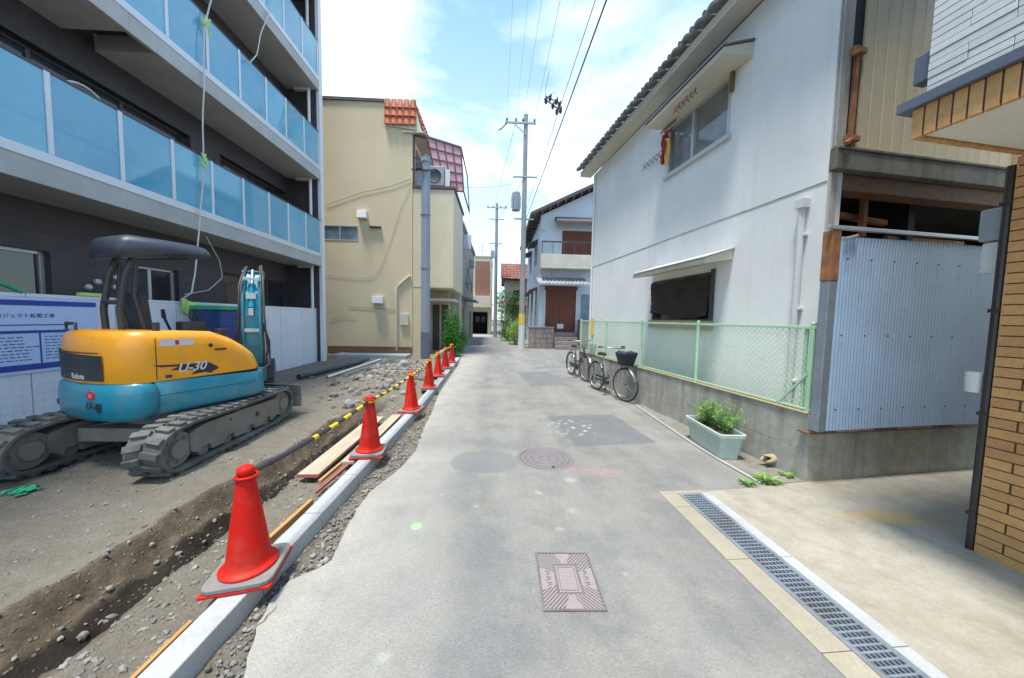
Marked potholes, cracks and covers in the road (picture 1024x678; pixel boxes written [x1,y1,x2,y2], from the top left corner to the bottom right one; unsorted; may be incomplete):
manhole cover [516,447,574,472]
manhole cover [535,552,608,612]
